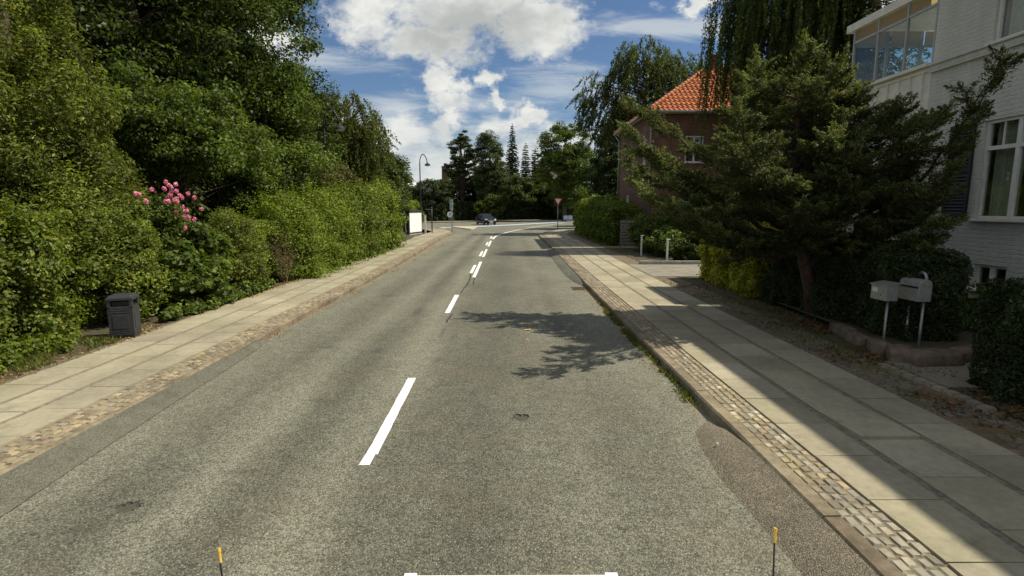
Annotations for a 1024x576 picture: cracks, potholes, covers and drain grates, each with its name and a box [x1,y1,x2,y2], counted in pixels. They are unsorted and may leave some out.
pothole [114,500,145,514]
